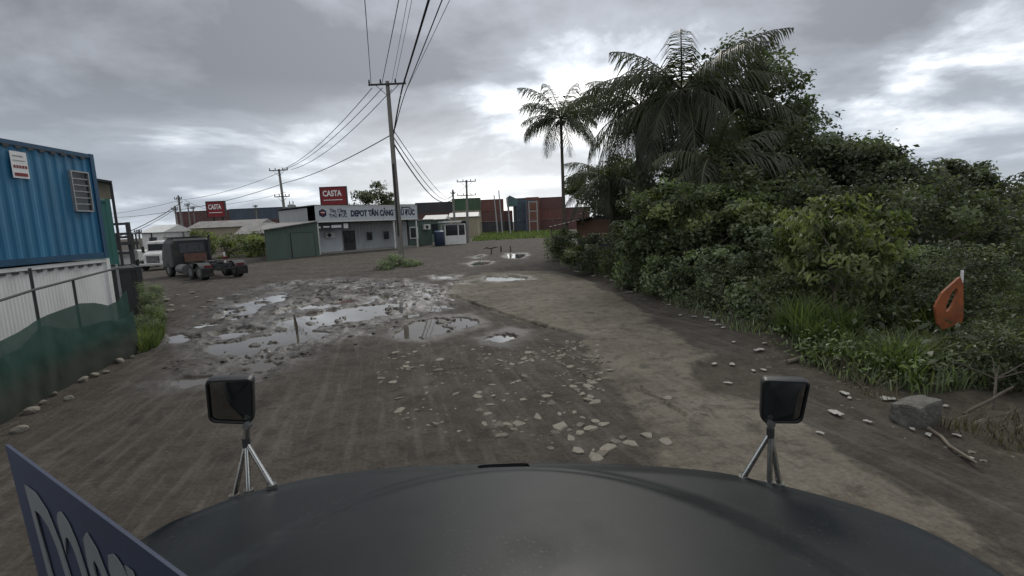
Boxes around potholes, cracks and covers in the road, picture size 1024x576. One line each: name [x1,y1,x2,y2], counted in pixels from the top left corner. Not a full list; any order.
pothole [193,300,409,376]
pothole [475,330,526,344]
pothole [386,315,487,343]
pothole [159,331,203,345]
